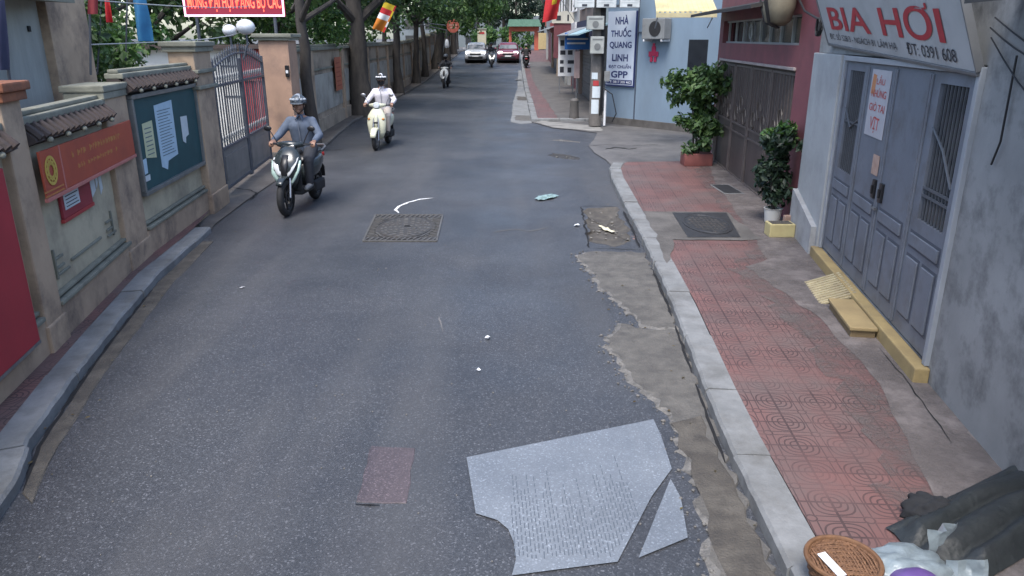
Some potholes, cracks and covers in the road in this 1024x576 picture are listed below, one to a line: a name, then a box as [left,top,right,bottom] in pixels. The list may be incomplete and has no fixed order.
manhole cover [362,214,444,242]
manhole cover [672,212,740,237]
crack [881,350,952,443]
